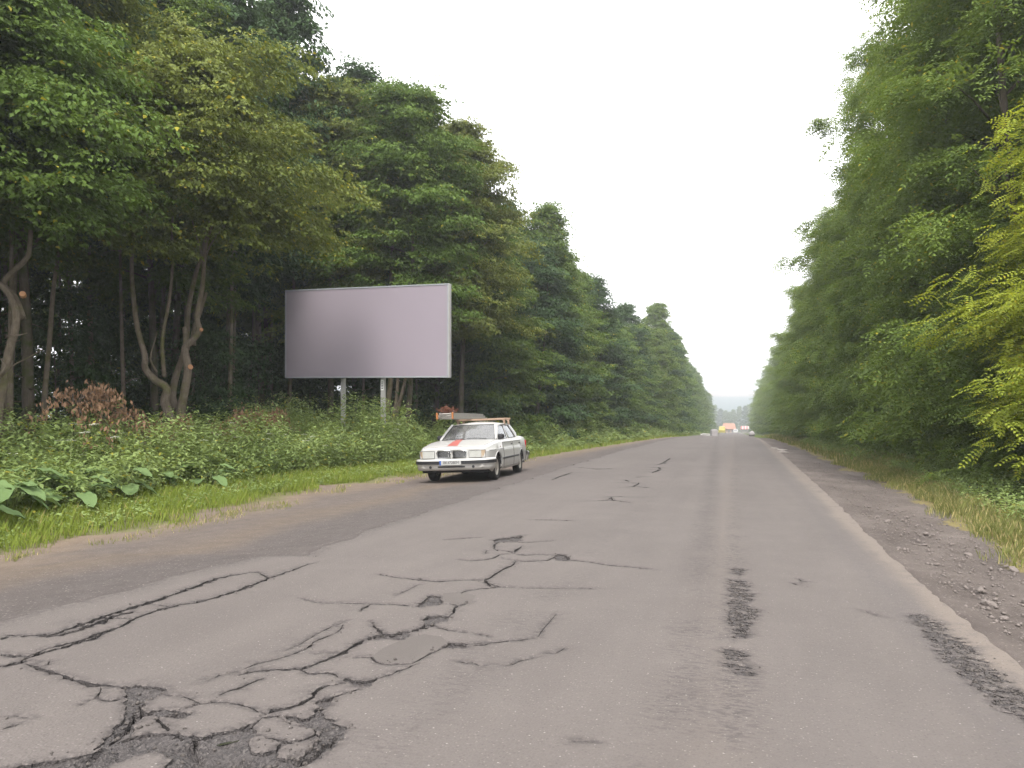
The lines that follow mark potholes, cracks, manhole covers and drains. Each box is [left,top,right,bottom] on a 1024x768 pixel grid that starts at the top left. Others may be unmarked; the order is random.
crack [0,563,313,706]
crack [603,459,669,503]
pothole [723,649,759,676]
crack [304,535,565,666]
crack [156,621,441,731]
pothole [14,698,348,768]
pothole [727,580,758,638]
pothole [93,685,191,751]
pothole [910,615,1024,720]
